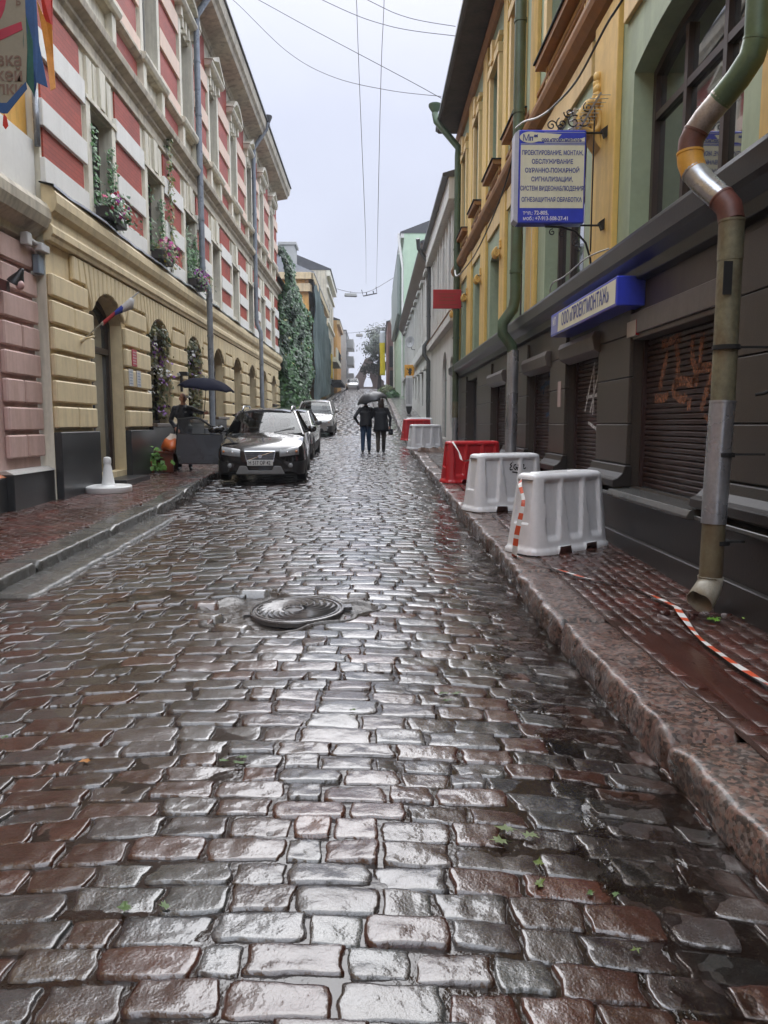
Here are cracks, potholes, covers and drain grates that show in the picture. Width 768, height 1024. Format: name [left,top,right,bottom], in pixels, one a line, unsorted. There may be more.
manhole cover [243,596,352,629]
